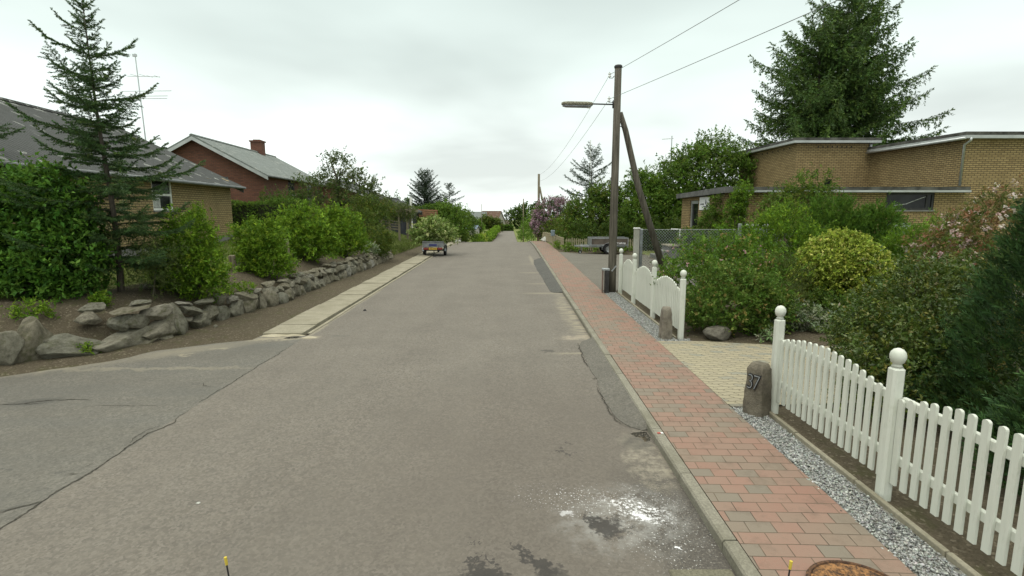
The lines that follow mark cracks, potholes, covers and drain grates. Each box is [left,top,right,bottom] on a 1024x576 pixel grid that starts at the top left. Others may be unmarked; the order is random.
crack [578,347,637,429]
